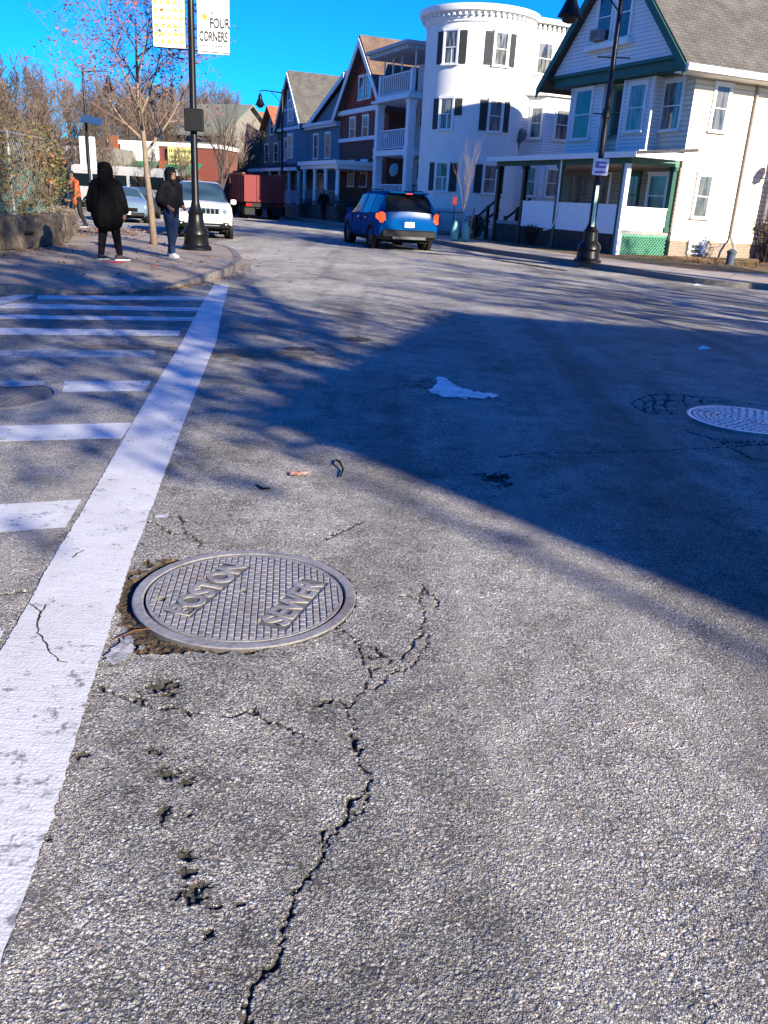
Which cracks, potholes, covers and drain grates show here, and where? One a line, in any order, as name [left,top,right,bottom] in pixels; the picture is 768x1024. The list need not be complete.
crack [240,584,440,1024]
manhole cover [132,550,356,653]
crack [146,514,212,548]
crack [0,550,84,663]
manhole cover [0,380,59,410]
crack [97,684,316,742]
crack [323,522,362,540]
manhole cover [687,406,768,435]
crack [631,394,768,459]
